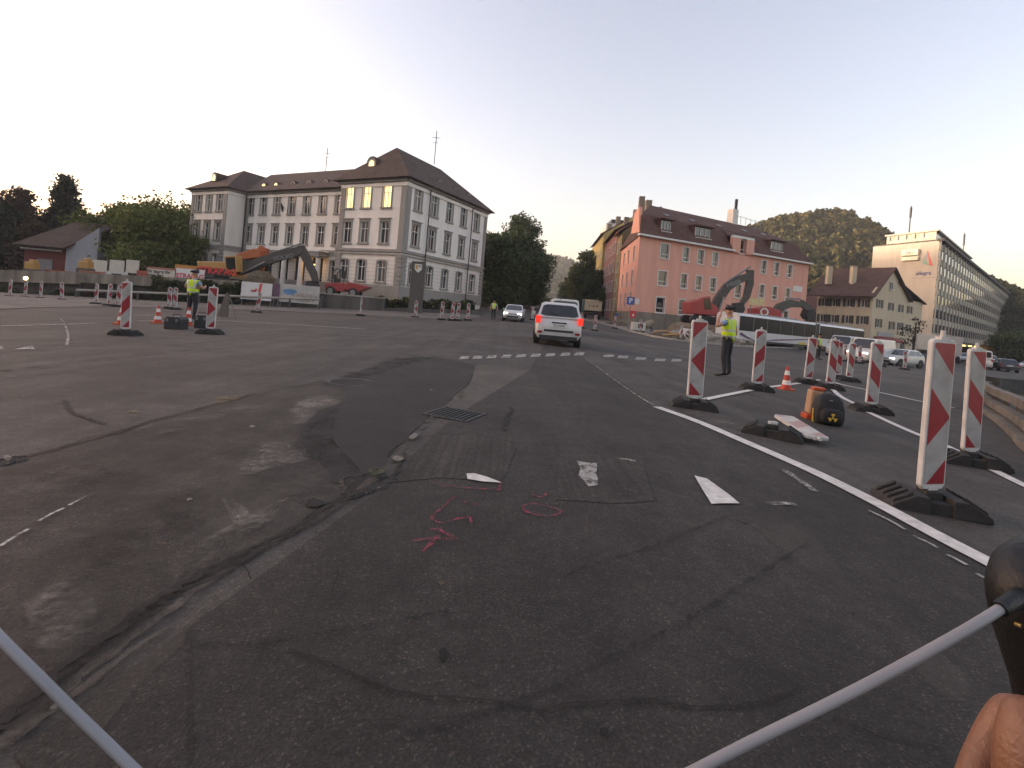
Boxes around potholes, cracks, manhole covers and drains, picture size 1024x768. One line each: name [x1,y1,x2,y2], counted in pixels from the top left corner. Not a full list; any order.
drain grate [421,406,487,422]
crack [17,393,256,458]
manhole cover [327,378,370,386]
crack [0,494,797,723]
